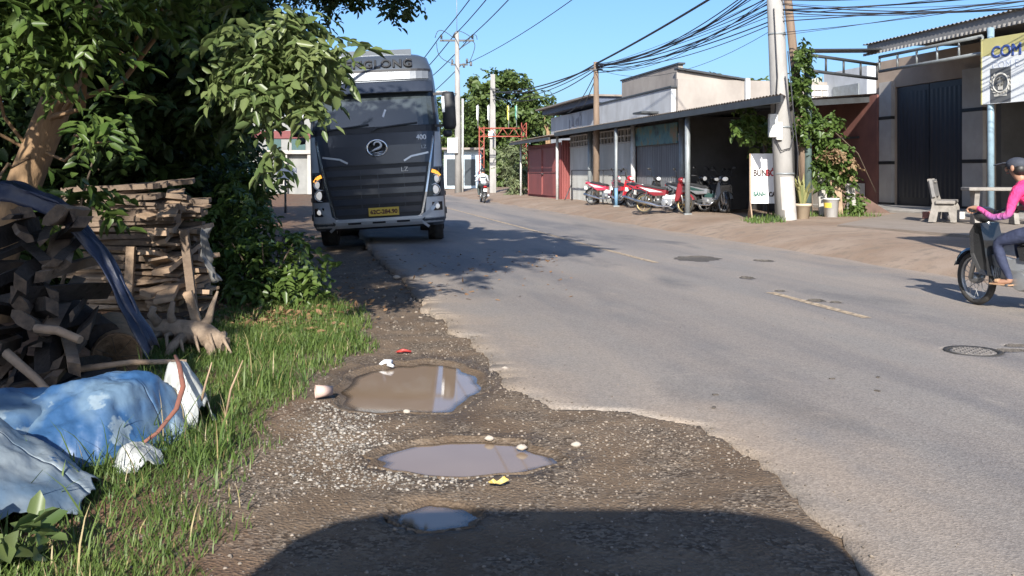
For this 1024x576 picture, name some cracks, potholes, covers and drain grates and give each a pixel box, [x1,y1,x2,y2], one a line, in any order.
pothole [331,358,492,415]
manhole cover [943,345,1003,357]
pothole [363,435,574,480]
pothole [383,499,487,534]
